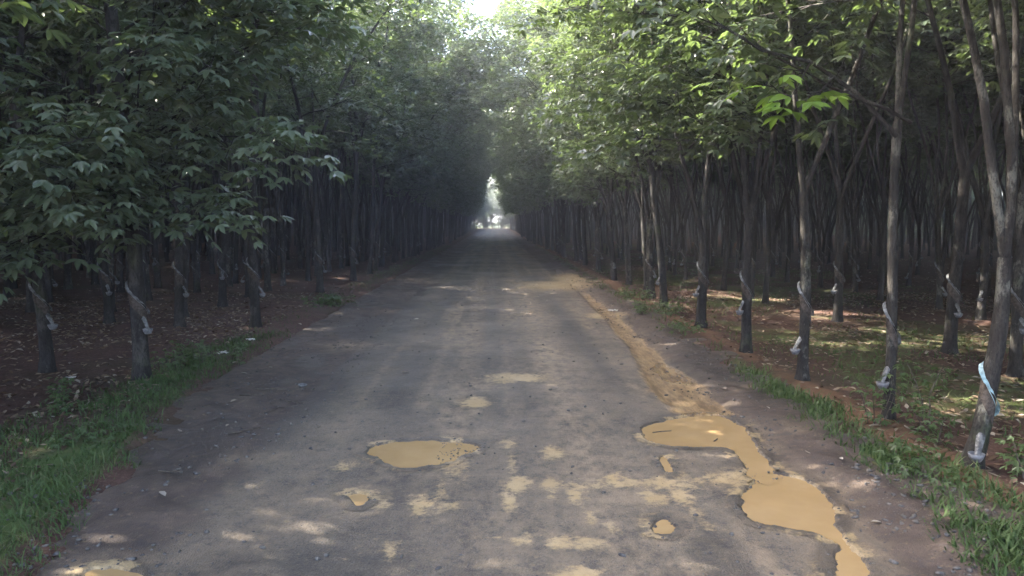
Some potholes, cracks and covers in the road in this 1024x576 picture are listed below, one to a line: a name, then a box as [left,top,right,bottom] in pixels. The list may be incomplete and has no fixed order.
pothole [631,412,787,485]
pothole [726,469,889,576]
pothole [335,487,382,511]
pothole [354,436,494,471]
pothole [637,512,690,540]
